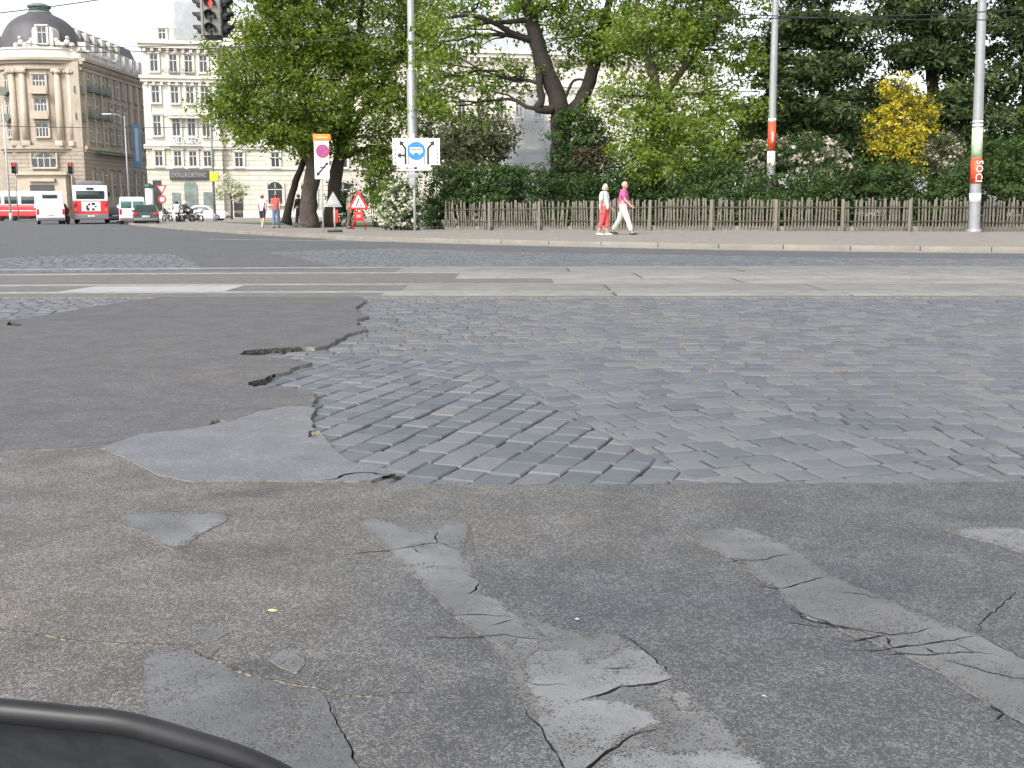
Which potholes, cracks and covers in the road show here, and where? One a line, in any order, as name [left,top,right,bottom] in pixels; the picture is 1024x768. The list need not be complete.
crack [526,710,564,768]
crack [0,629,396,768]
crack [977,592,1016,634]
crack [588,730,655,768]
crack [596,636,668,697]
crack [787,606,1017,656]
